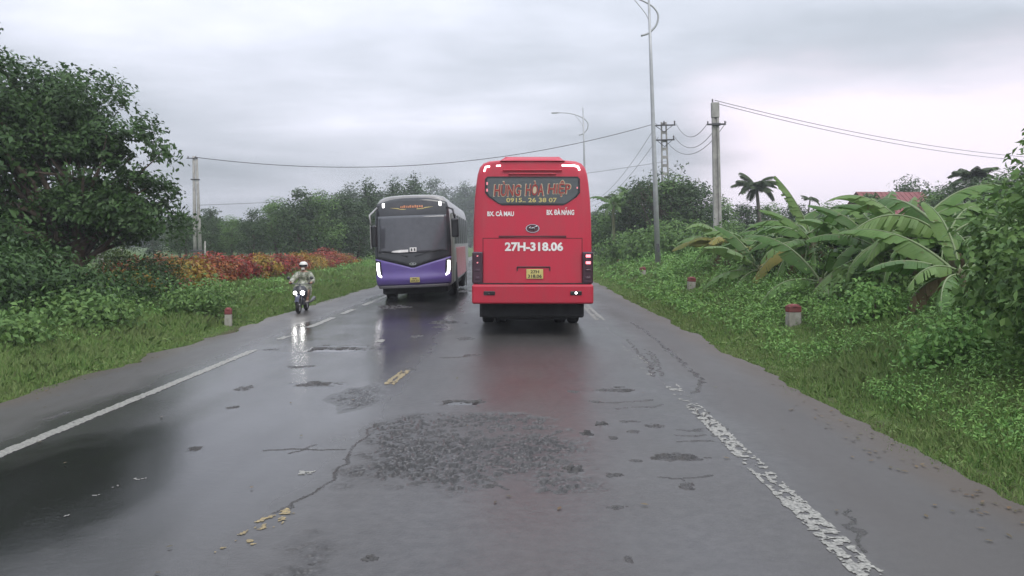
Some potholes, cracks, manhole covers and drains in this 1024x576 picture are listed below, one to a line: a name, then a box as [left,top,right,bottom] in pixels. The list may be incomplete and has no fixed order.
crack [626,322,734,442]
crack [842,509,868,553]
pothole [560,464,584,475]
crack [263,423,378,514]
pothole [650,453,712,462]
